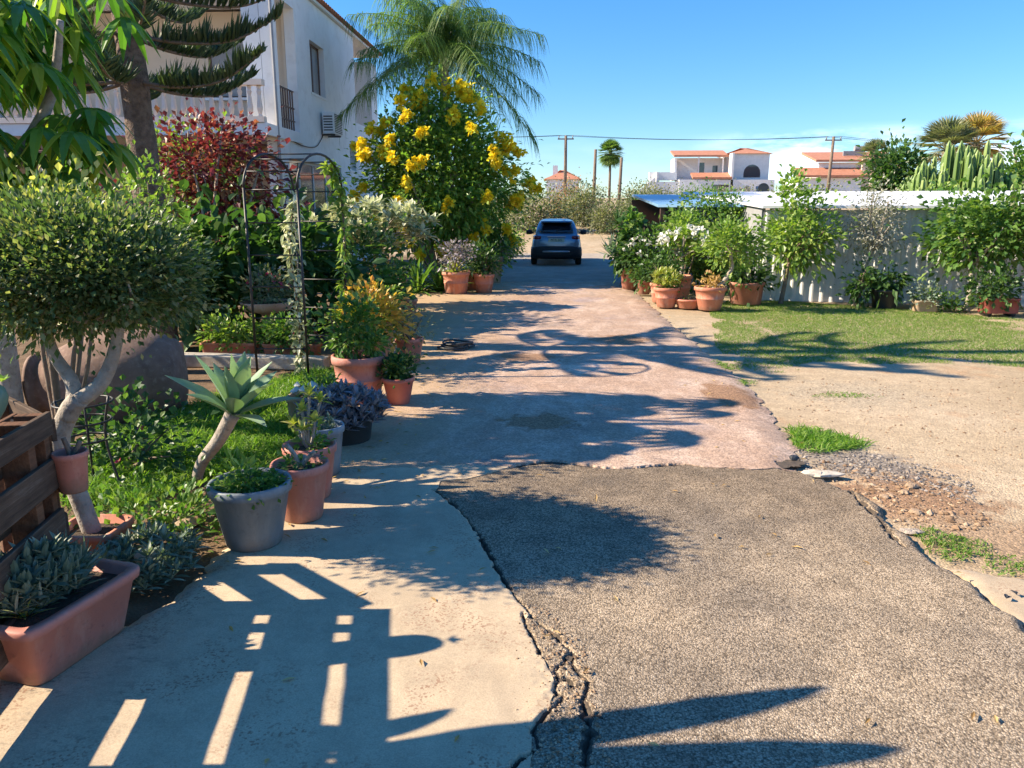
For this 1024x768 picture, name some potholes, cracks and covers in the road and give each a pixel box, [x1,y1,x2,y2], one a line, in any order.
crack [435,491,603,768]
crack [847,490,904,547]
